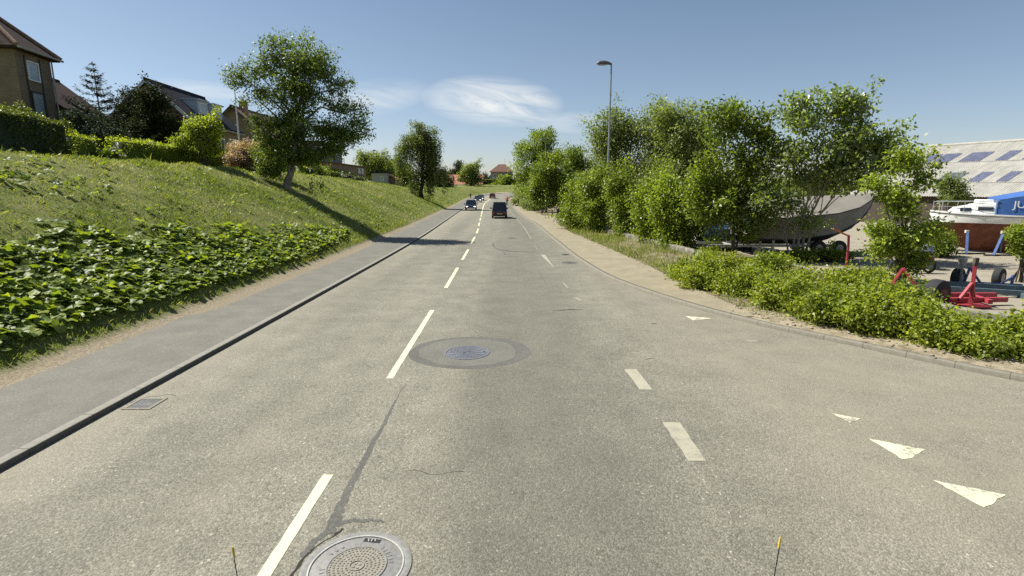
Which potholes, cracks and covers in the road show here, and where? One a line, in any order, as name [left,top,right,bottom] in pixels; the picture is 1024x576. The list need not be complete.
manhole cover [299,531,412,576]
manhole cover [444,346,490,360]
drain grate [121,398,168,410]
